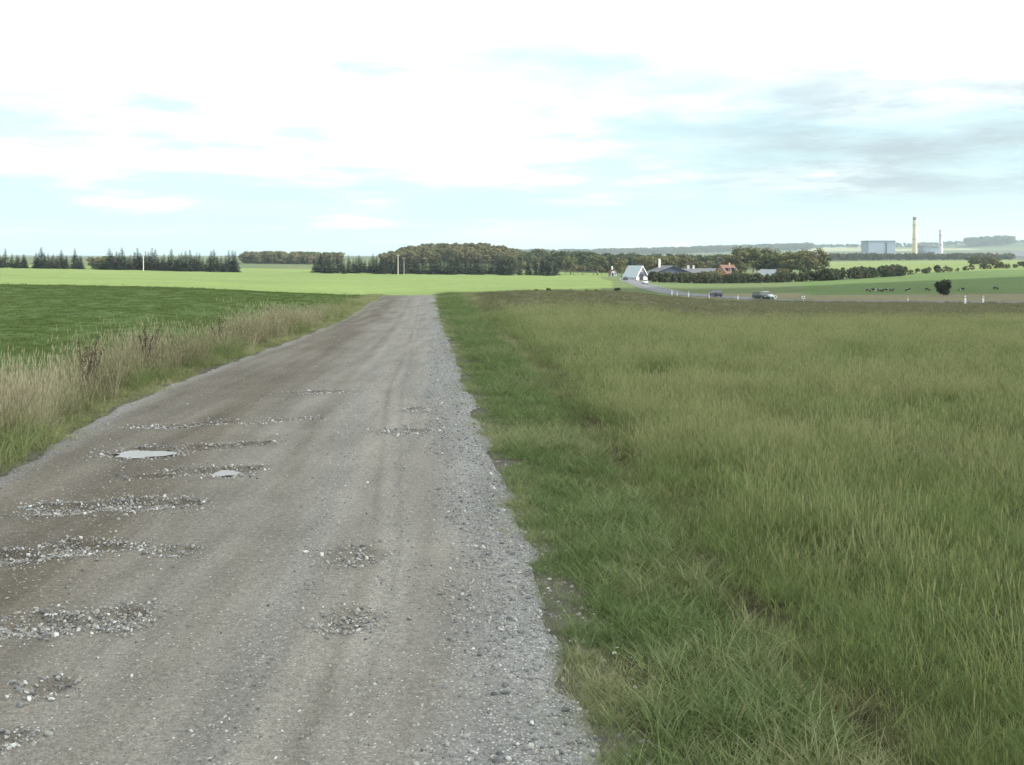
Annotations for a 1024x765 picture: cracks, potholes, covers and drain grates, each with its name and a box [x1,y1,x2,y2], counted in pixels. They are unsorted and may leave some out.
pothole [106,415,324,431]
pothole [4,492,212,521]
pothole [304,602,388,640]
pothole [0,598,177,645]
pothole [0,530,167,573]
pothole [303,539,417,575]
pothole [108,462,275,483]
pothole [366,425,445,438]
pothole [0,718,55,755]
pothole [1,664,87,708]
pothole [88,438,290,462]
pothole [131,537,217,559]
